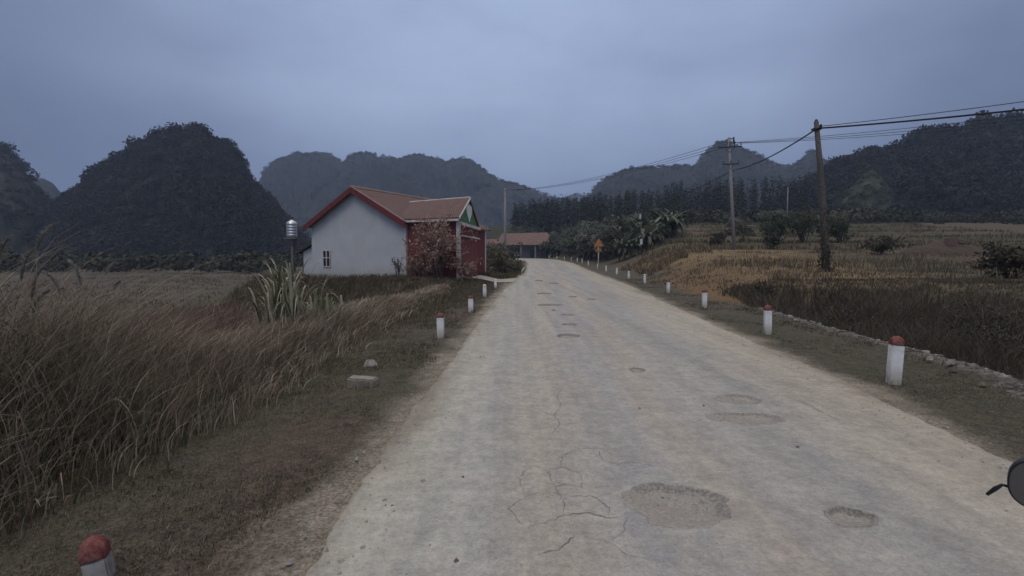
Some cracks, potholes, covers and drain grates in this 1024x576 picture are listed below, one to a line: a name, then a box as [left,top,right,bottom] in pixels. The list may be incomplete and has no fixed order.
crack [508,448,653,560]
pothole [823,505,878,527]
pothole [714,394,762,404]
pothole [705,412,786,425]
pothole [621,482,732,529]
